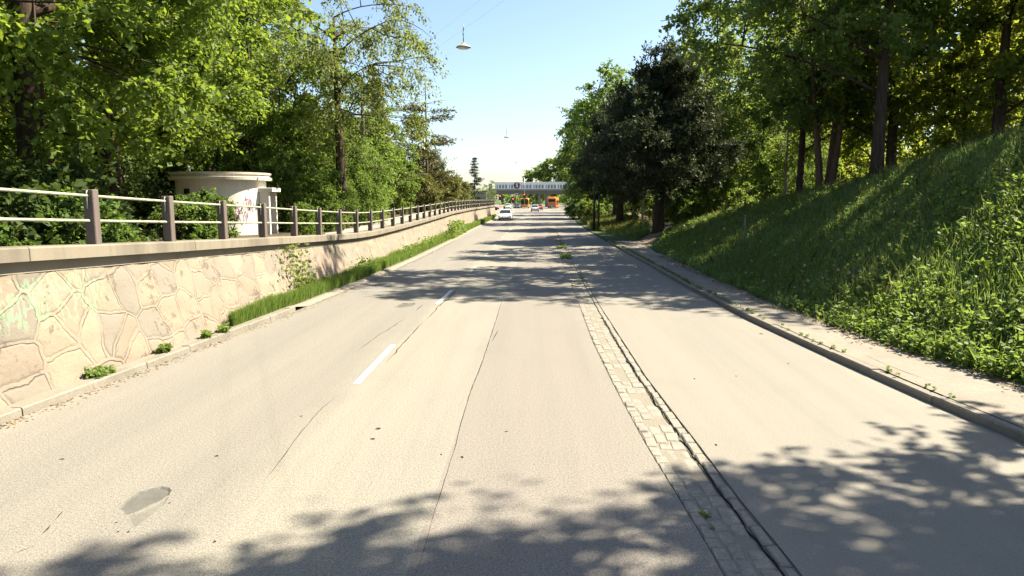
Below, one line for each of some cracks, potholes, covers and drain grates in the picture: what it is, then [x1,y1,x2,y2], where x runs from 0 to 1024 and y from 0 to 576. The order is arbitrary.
crack [266,399,333,479]
crack [360,285,470,360]
